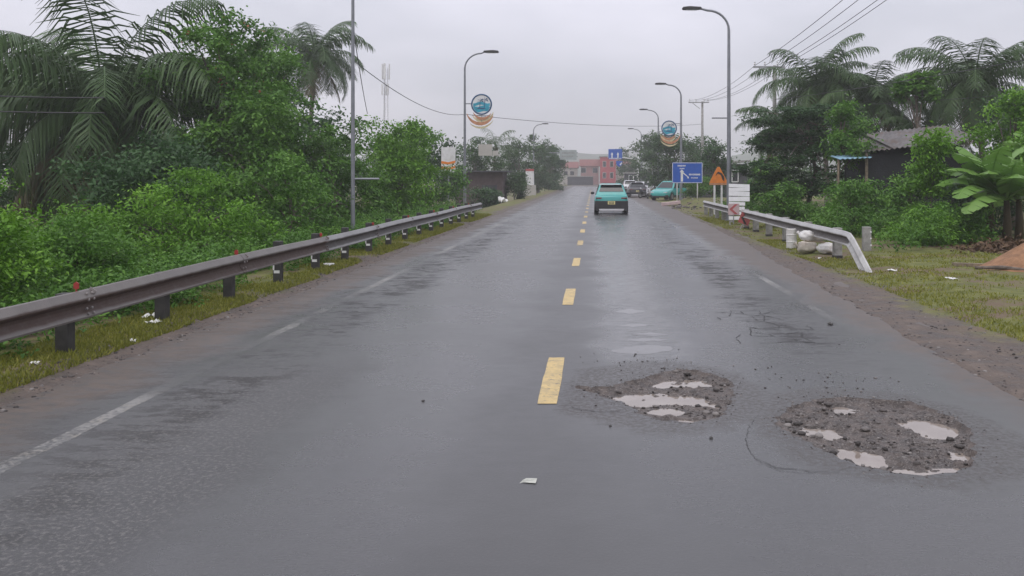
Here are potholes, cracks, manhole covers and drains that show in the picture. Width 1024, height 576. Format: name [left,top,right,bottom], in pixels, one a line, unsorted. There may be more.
pothole [774,397,977,476]
crack [745,416,851,473]
crack [717,310,813,343]
pothole [575,369,736,423]
